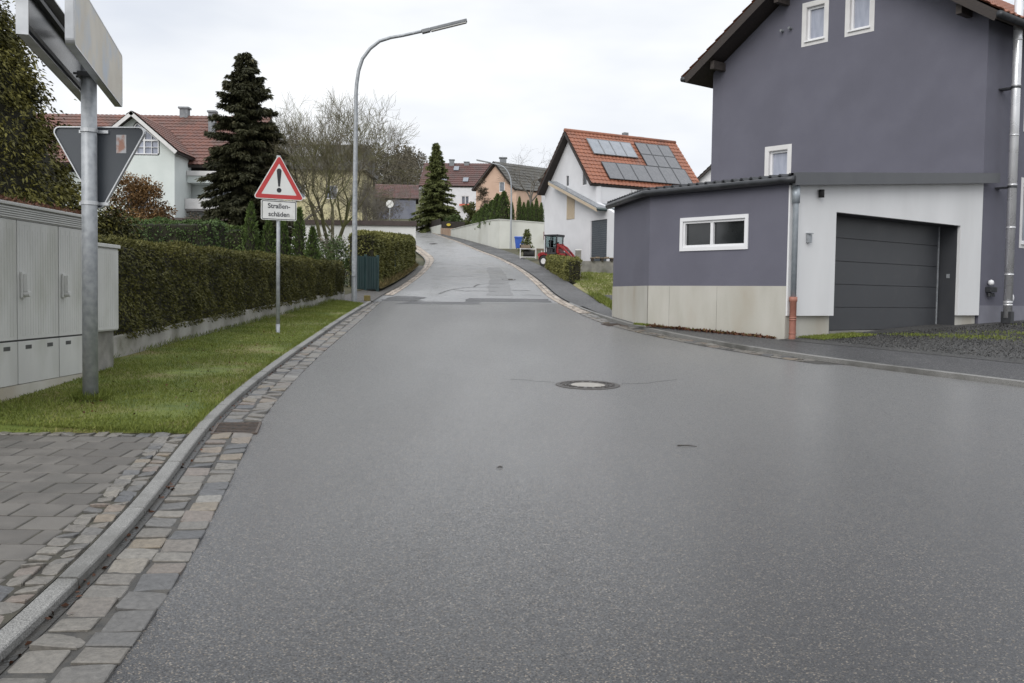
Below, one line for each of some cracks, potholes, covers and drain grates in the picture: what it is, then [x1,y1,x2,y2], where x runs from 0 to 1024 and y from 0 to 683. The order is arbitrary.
manhole cover [556,380,620,390]
drain grate [210,422,262,435]
